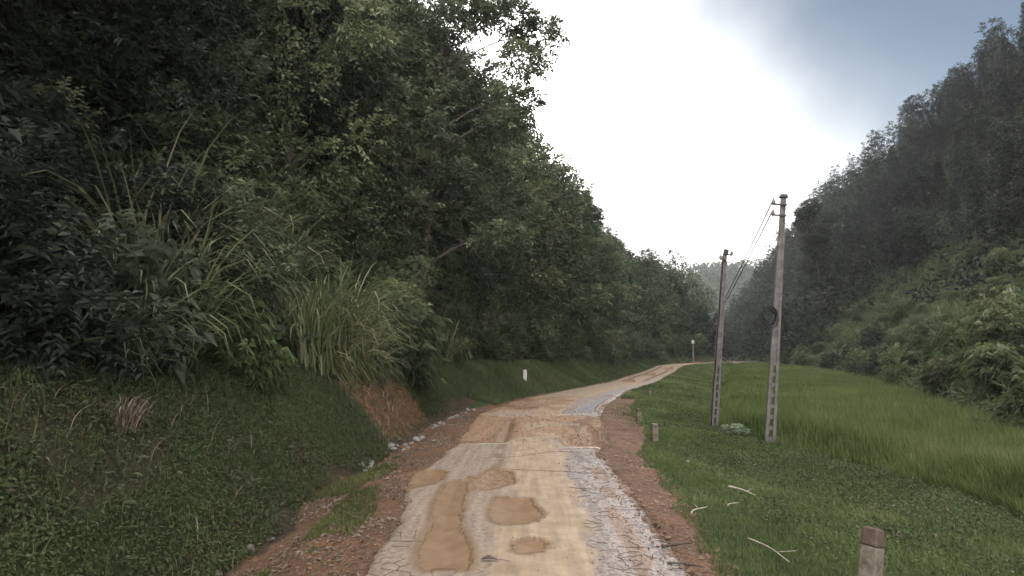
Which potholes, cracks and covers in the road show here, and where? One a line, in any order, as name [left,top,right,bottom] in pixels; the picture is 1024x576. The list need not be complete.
pothole [514,539,545,553]
pothole [469,470,514,490]
pothole [418,480,474,571]
pothole [406,470,445,492]
pothole [489,497,544,525]
crack [497,447,686,576]
crack [362,530,457,576]
